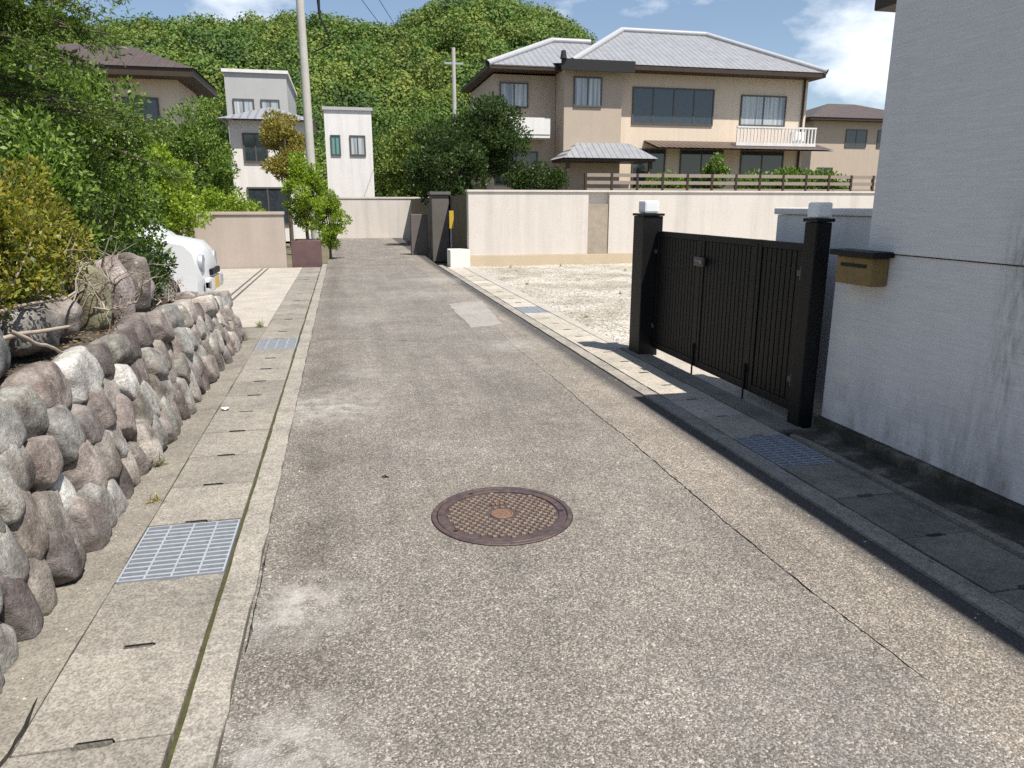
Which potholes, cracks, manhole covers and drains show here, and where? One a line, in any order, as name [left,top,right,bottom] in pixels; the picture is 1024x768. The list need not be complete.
drain grate [116,519,241,584]
manhole cover [432,487,572,546]
drain grate [254,338,298,350]
drain grate [734,434,836,468]
